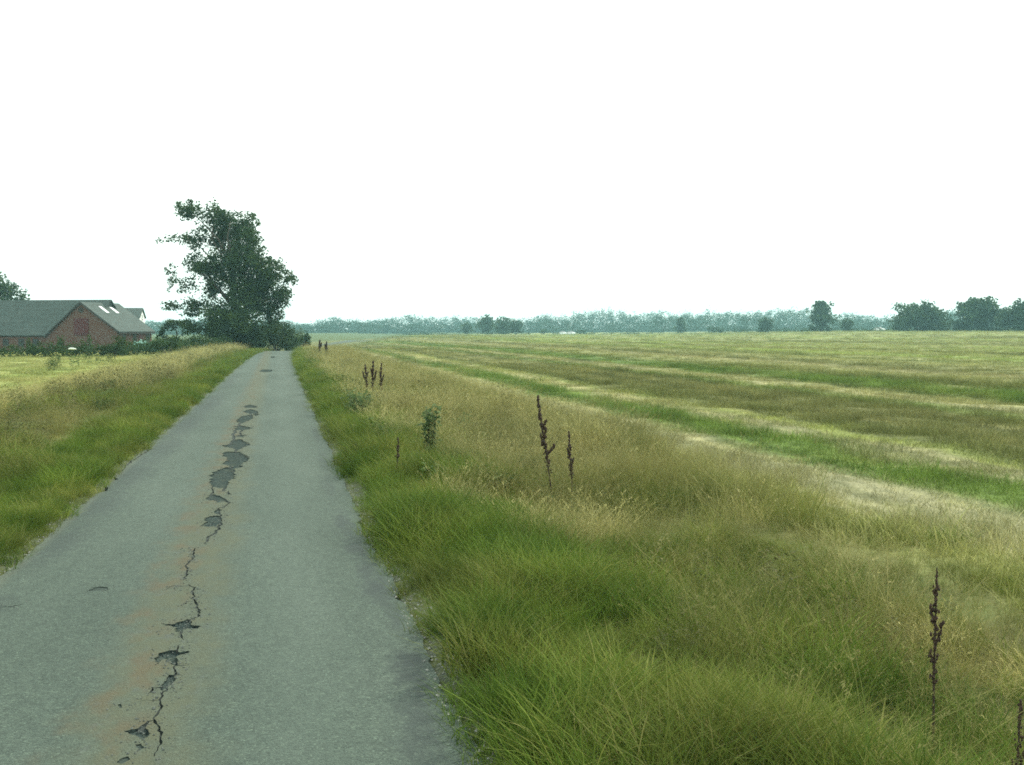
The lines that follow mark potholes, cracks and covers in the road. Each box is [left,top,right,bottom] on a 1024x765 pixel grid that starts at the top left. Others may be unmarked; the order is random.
pothole [209,467,236,489]
pothole [154,650,190,666]
crack [137,414,253,756]
pothole [221,439,250,450]
pothole [125,728,151,739]
pothole [160,675,175,691]
pothole [222,452,249,470]
pothole [200,516,222,527]
pothole [165,619,200,632]
